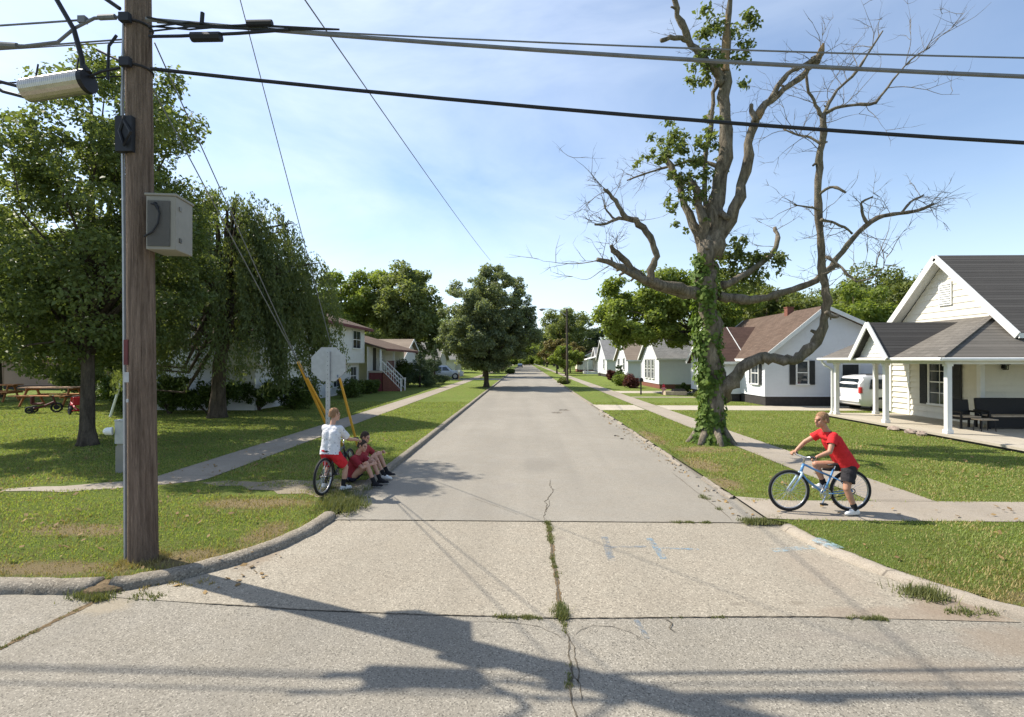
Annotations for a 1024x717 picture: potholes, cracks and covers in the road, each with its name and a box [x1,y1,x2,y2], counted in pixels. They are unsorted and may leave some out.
crack [478,617,654,717]
